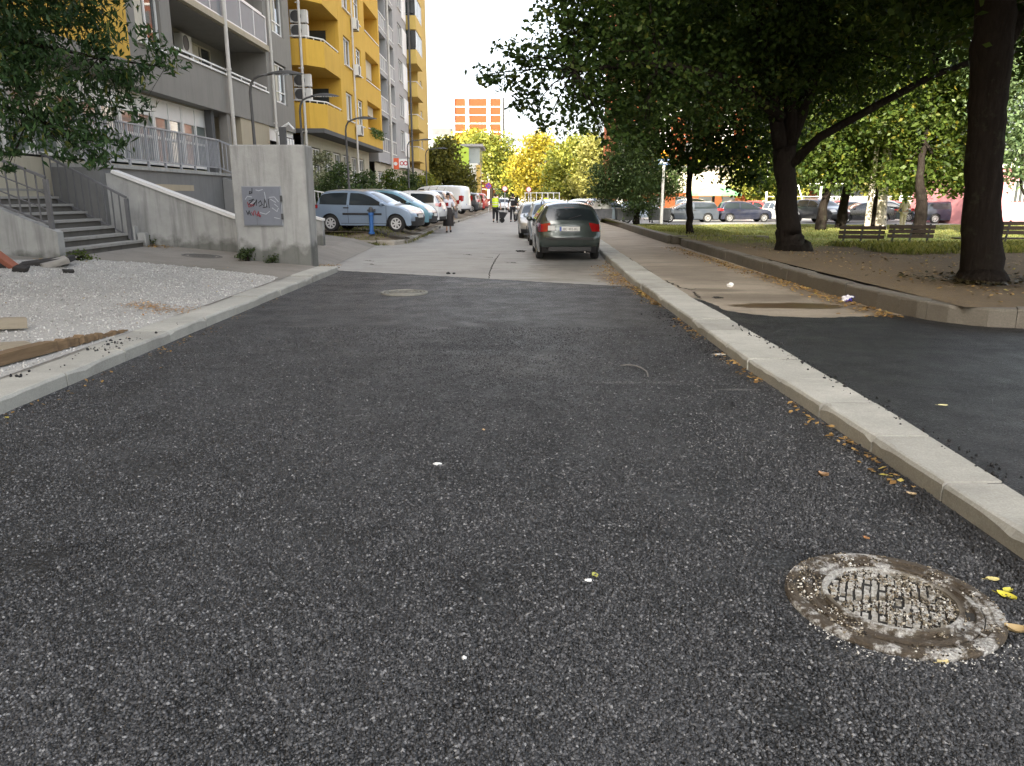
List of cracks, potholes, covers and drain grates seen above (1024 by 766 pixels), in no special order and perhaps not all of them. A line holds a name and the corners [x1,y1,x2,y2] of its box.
manhole cover [785,552,1009,661]
